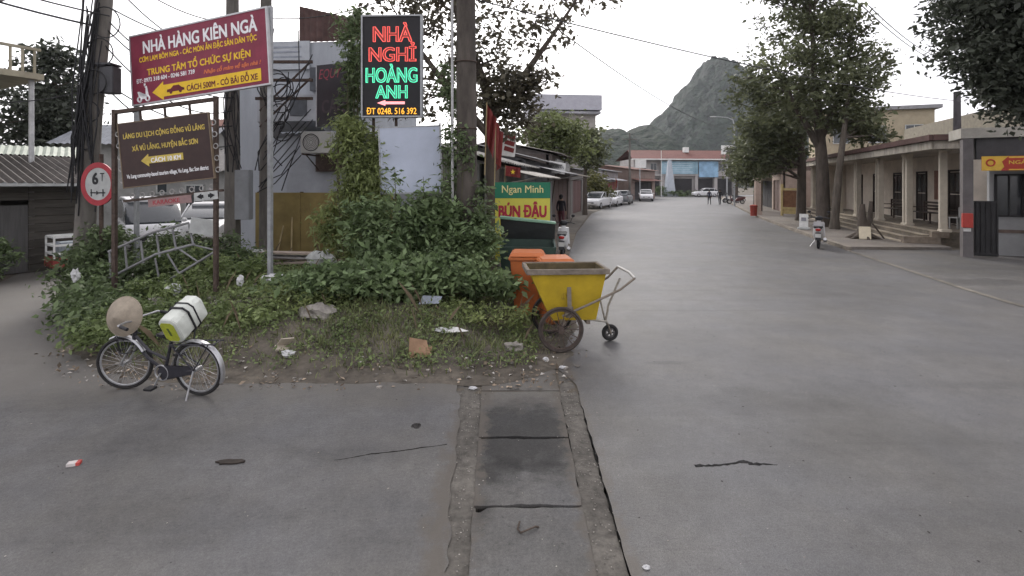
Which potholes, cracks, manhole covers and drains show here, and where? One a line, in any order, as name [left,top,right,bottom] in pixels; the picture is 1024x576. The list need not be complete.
crack [338,444,447,460]
crack [582,407,631,575]
